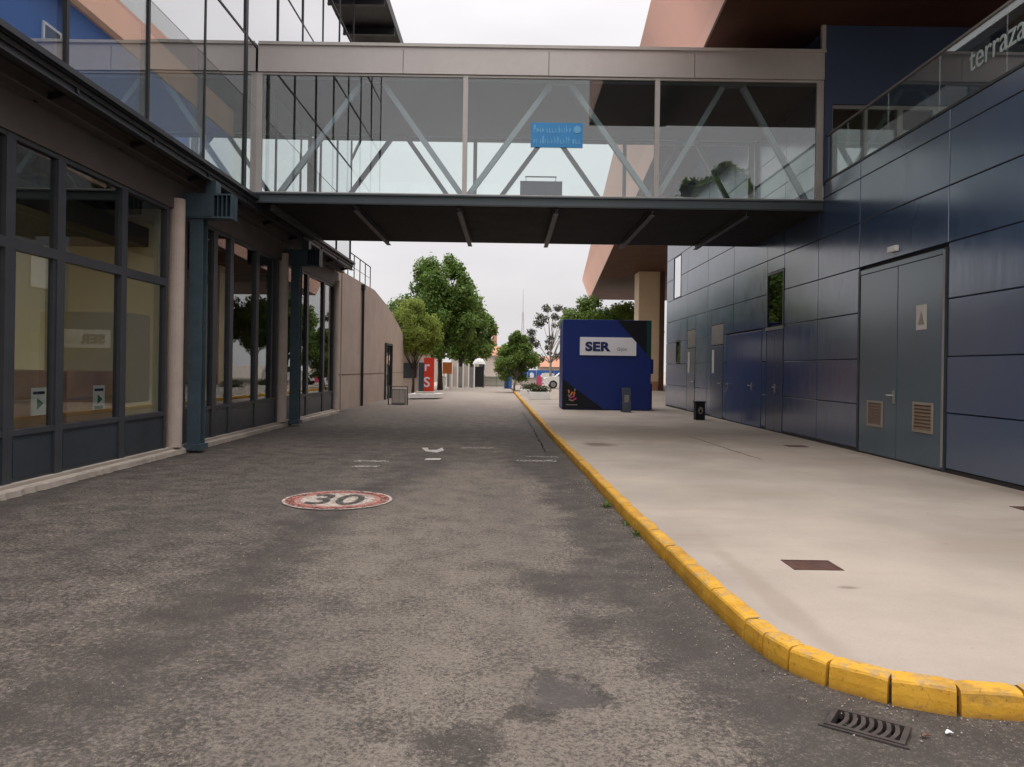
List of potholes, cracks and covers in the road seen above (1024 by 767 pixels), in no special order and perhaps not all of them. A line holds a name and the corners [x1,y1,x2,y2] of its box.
drain grate [818,706,912,750]
manhole cover [781,560,844,571]
